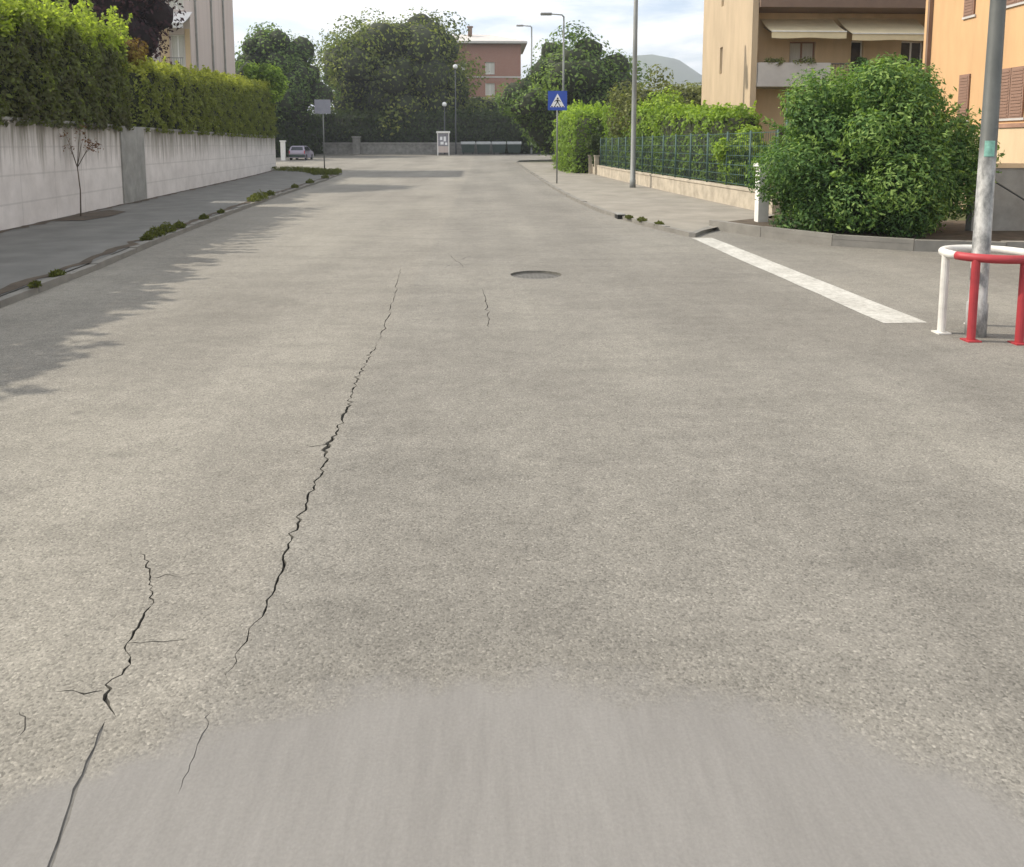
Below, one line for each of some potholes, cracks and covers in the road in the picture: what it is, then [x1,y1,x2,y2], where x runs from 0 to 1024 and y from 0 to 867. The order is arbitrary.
crack [47,554,204,867]
manhole cover [510,271,562,279]
crack [223,269,401,687]
